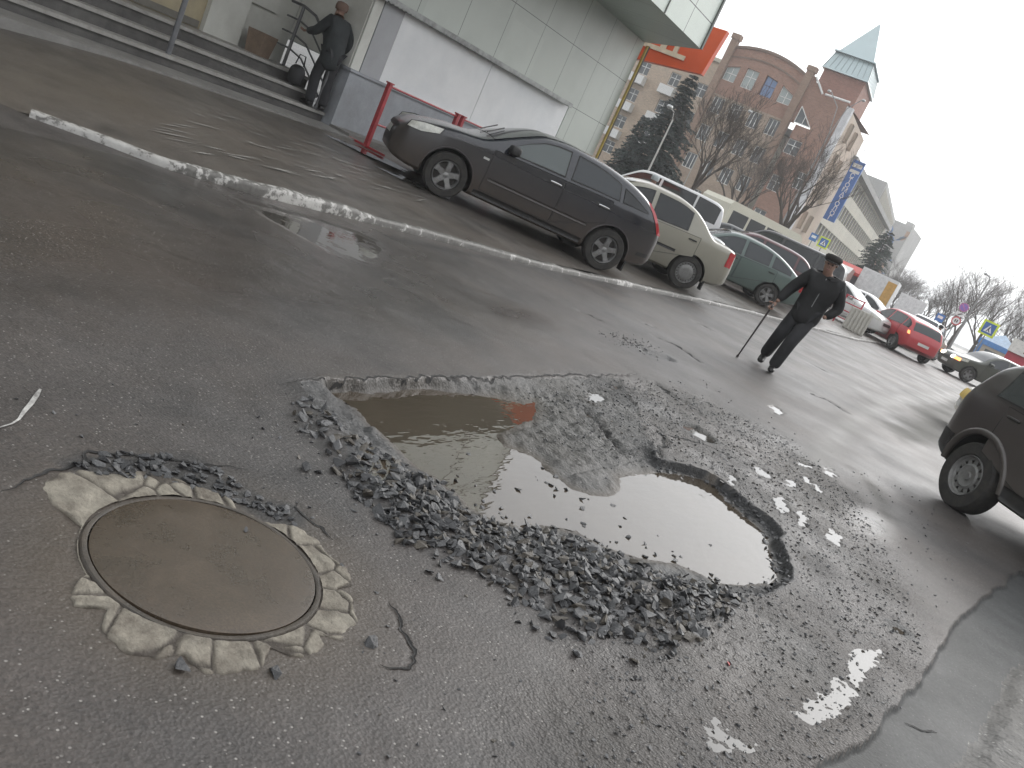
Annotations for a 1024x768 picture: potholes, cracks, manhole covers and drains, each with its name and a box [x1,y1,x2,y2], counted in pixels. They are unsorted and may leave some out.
crack [2,450,244,491]
pothole [300,376,793,594]
crack [380,603,417,670]
manhole cover [43,470,358,675]
